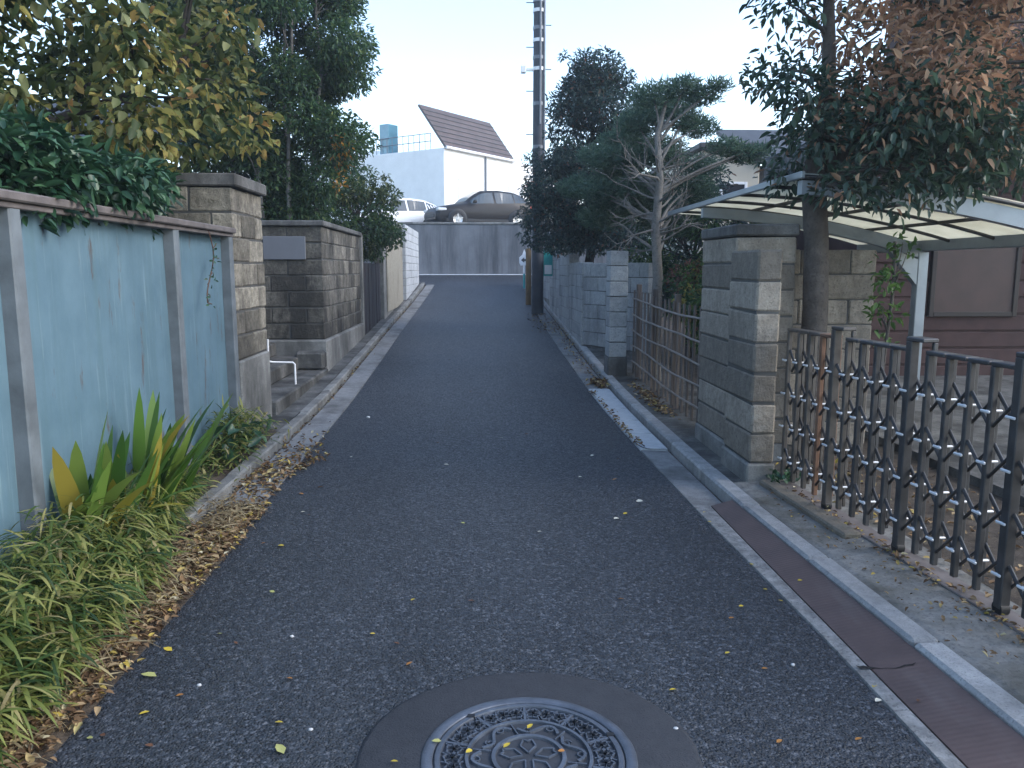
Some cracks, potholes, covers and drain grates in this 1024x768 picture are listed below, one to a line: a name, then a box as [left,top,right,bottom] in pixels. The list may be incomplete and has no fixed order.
manhole cover [355,672,703,768]
